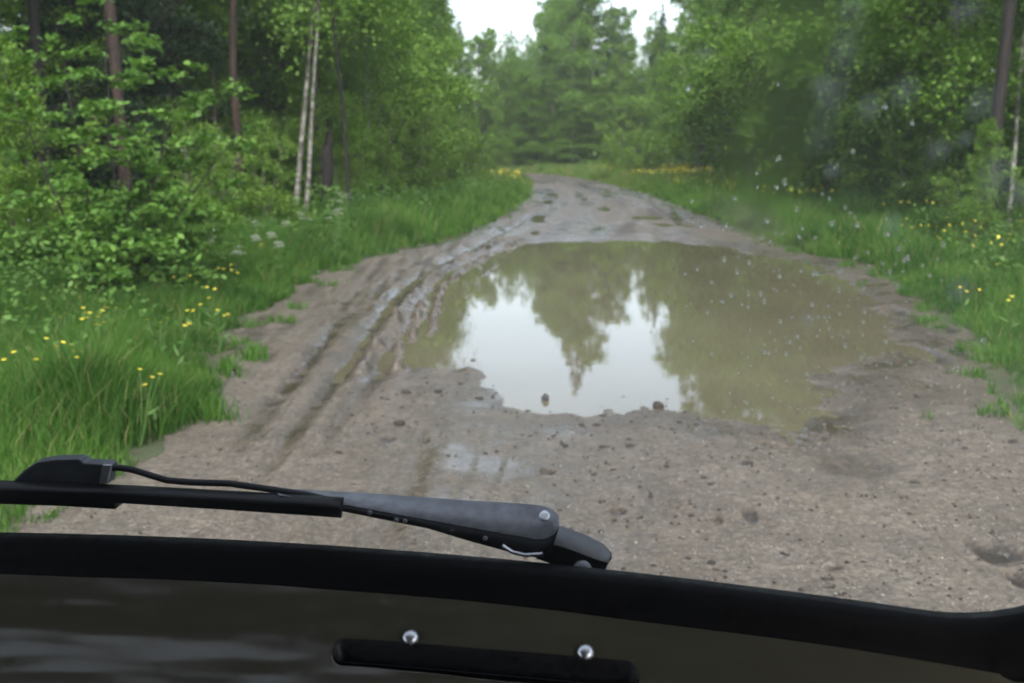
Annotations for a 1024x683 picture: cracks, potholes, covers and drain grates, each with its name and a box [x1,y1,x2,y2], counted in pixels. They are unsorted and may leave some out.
pothole [944,529,1024,568]
pothole [301,240,937,443]
